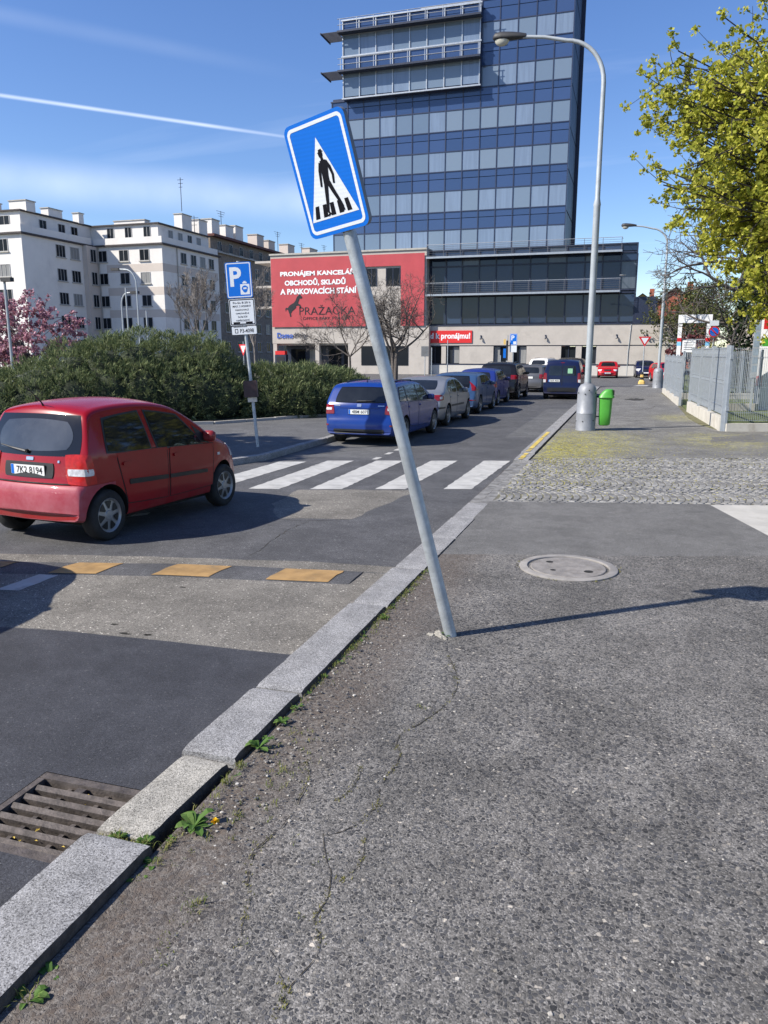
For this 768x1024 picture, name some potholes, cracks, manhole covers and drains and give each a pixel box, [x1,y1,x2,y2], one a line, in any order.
manhole cover [516,554,621,582]
drain grate [0,772,141,863]
crack [240,655,460,1019]
